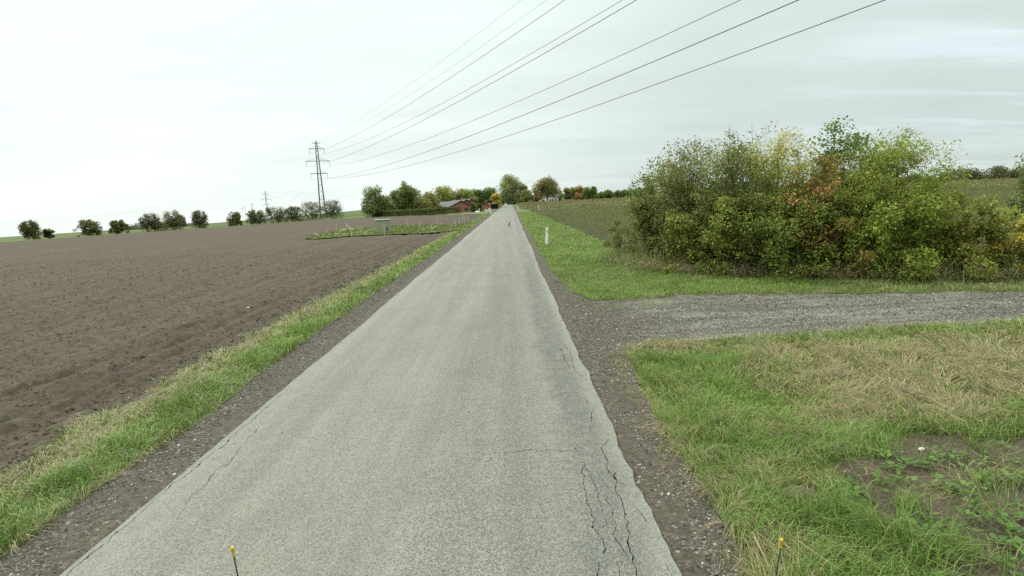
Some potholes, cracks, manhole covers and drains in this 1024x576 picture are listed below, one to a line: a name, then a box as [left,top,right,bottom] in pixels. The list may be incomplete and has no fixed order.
crack [503,392,647,576]
crack [66,392,296,576]
